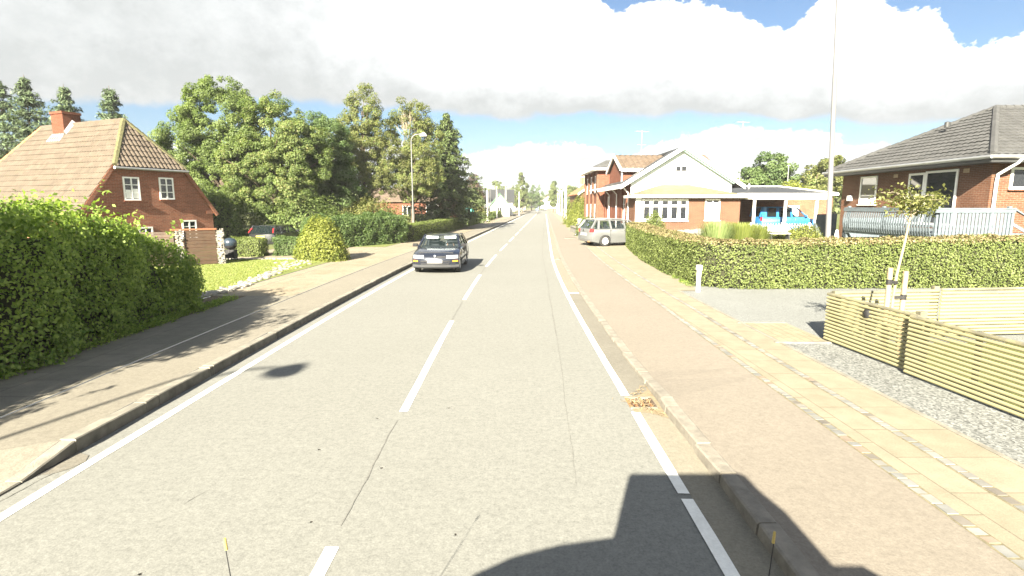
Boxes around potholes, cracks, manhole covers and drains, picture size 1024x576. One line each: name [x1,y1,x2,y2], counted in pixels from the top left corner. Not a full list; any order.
drain grate [612,396,658,410]
